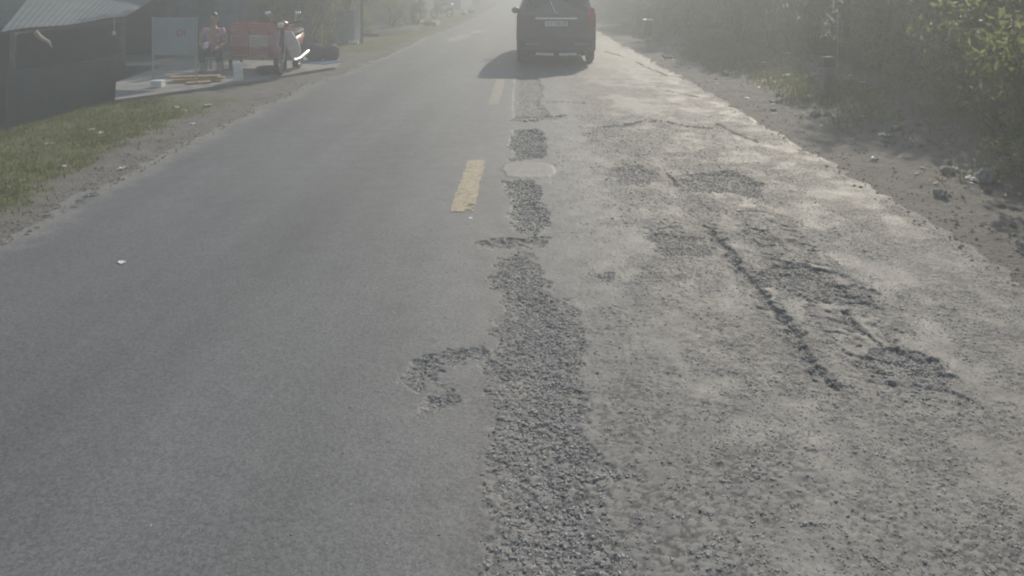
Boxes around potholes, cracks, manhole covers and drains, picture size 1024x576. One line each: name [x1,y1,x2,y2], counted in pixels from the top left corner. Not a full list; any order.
pothole [503,180,550,237]
pothole [677,171,766,198]
pothole [507,129,548,162]
pothole [398,347,490,394]
crack [703,210,843,392]
pothole [846,345,962,394]
pothole [418,395,460,417]
crack [602,121,758,143]
pothole [512,75,550,120]
pothole [478,249,632,576]
